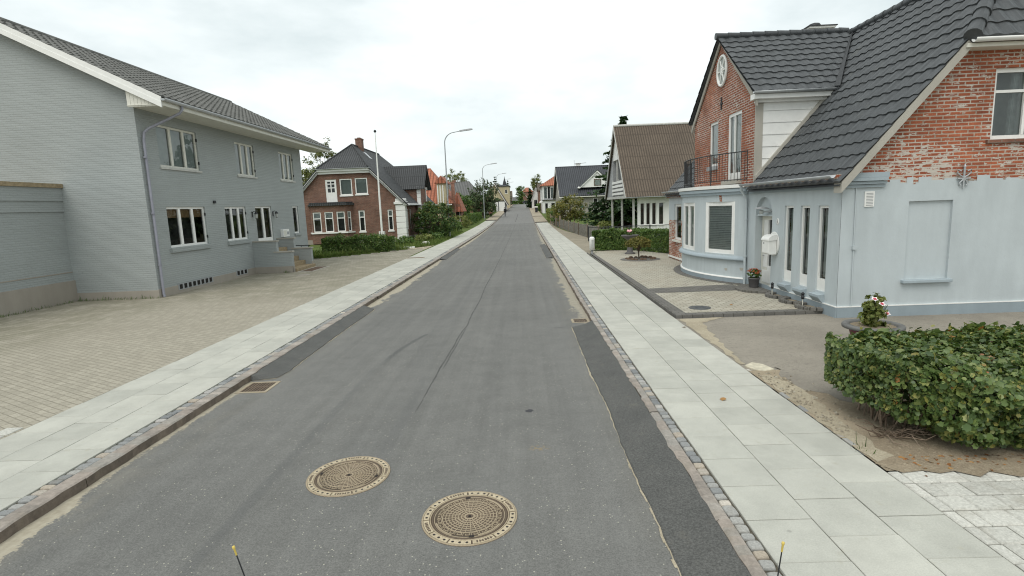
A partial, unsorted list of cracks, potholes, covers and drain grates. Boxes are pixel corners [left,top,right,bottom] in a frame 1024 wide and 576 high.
manhole cover [421,491,517,547]
manhole cover [306,456,390,497]
crack [417,215,518,409]
drain grate [234,381,281,394]
